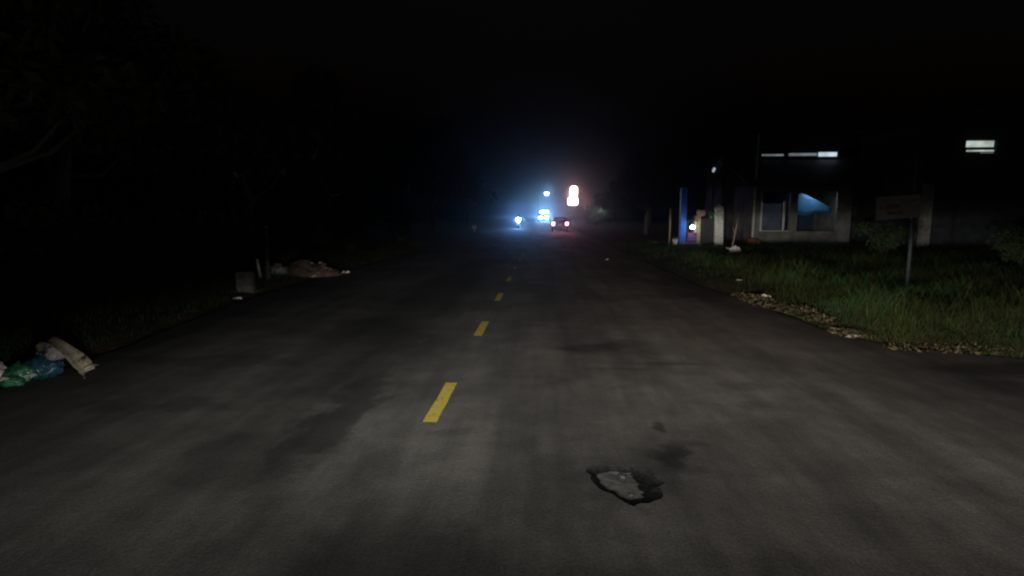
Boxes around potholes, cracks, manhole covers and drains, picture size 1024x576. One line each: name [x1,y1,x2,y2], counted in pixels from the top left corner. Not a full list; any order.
pothole [586,464,665,506]
